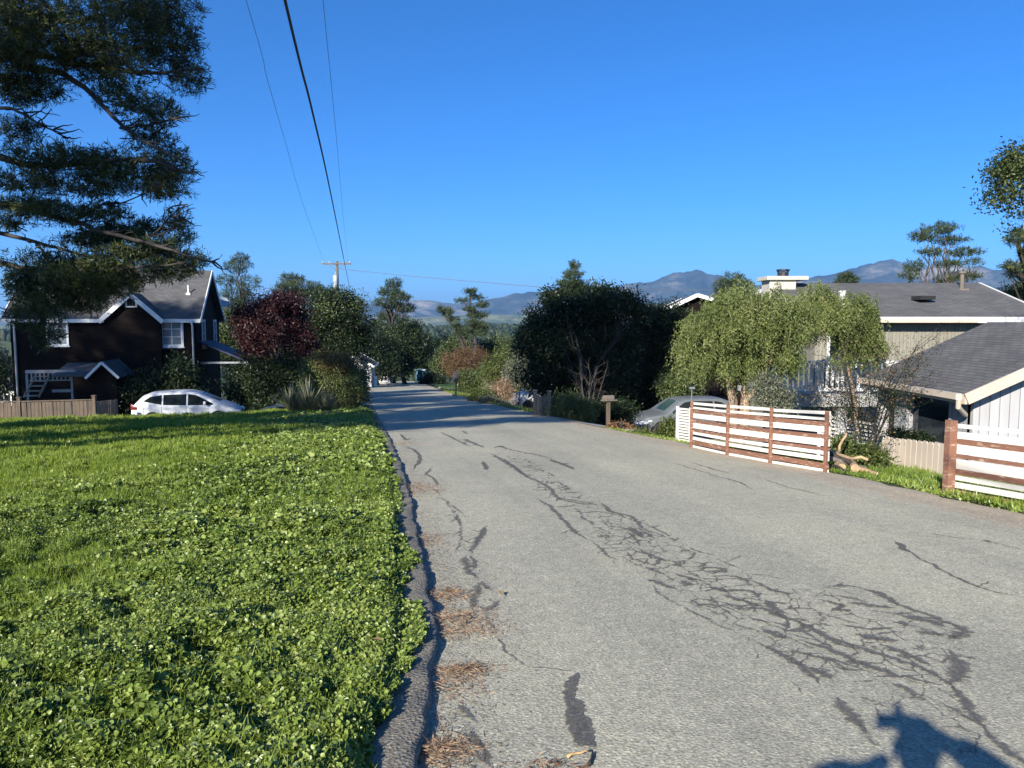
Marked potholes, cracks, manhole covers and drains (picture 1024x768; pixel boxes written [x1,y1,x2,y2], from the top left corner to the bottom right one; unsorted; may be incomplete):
crack [401,434,499,628]
crack [443,431,1024,763]
